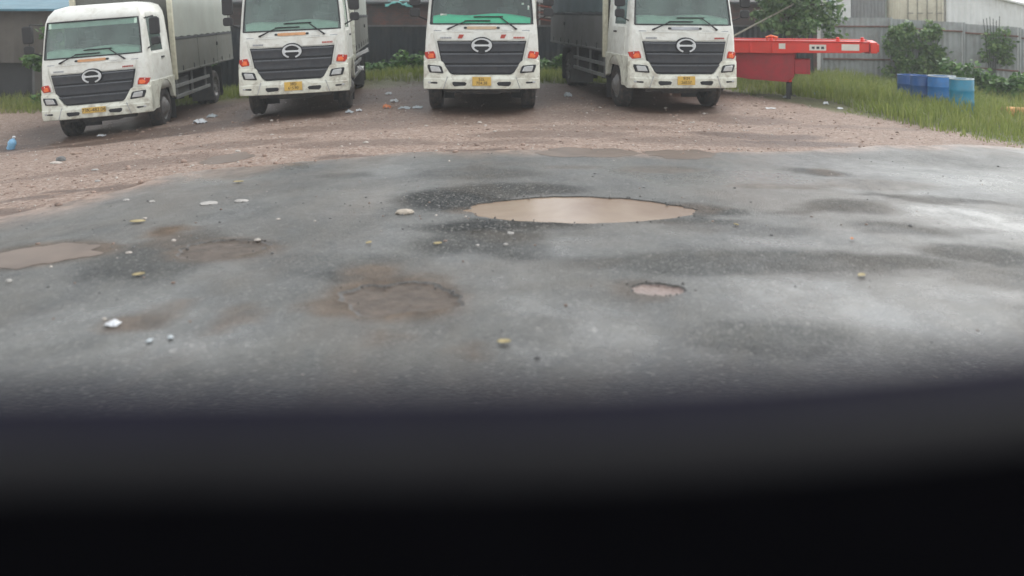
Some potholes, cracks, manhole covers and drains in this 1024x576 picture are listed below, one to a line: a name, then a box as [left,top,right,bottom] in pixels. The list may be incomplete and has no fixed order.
pothole [175,238,273,260]
pothole [337,280,465,321]
pothole [441,193,717,226]
pothole [626,281,697,296]
